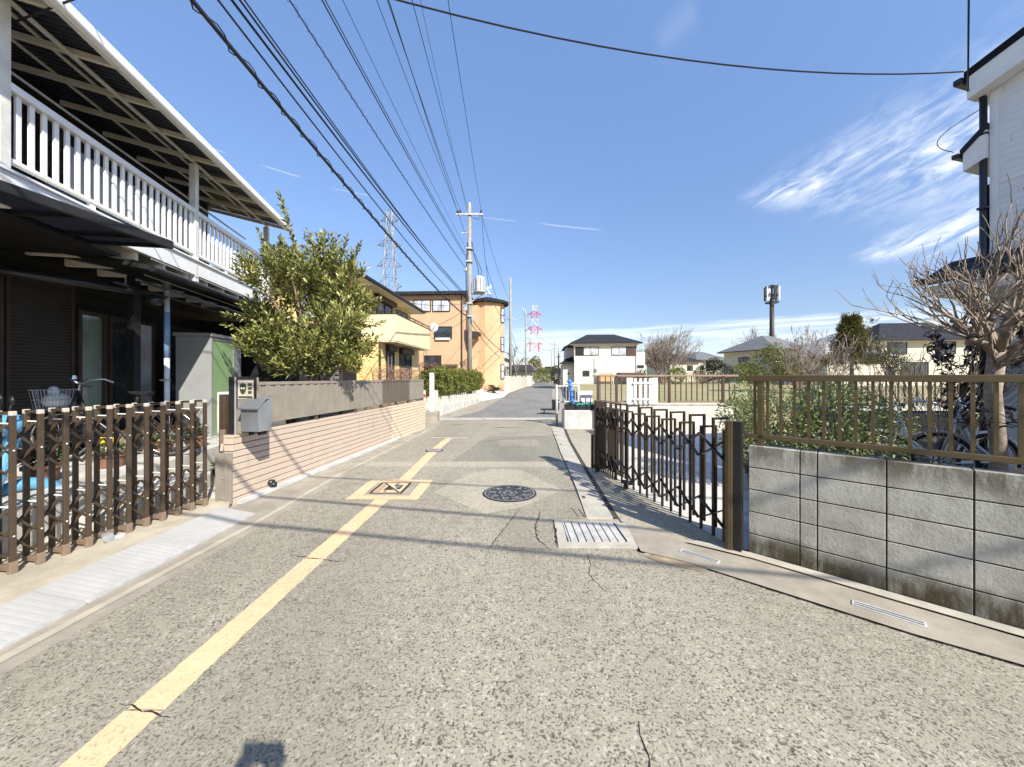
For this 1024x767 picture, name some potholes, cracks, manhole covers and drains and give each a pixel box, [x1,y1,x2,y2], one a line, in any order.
utility cover [364,482,419,495]
drain grate [554,519,638,551]
crack [119,703,171,718]
crack [638,721,651,767]
manhole cover [483,485,536,502]
crack [486,508,585,553]
